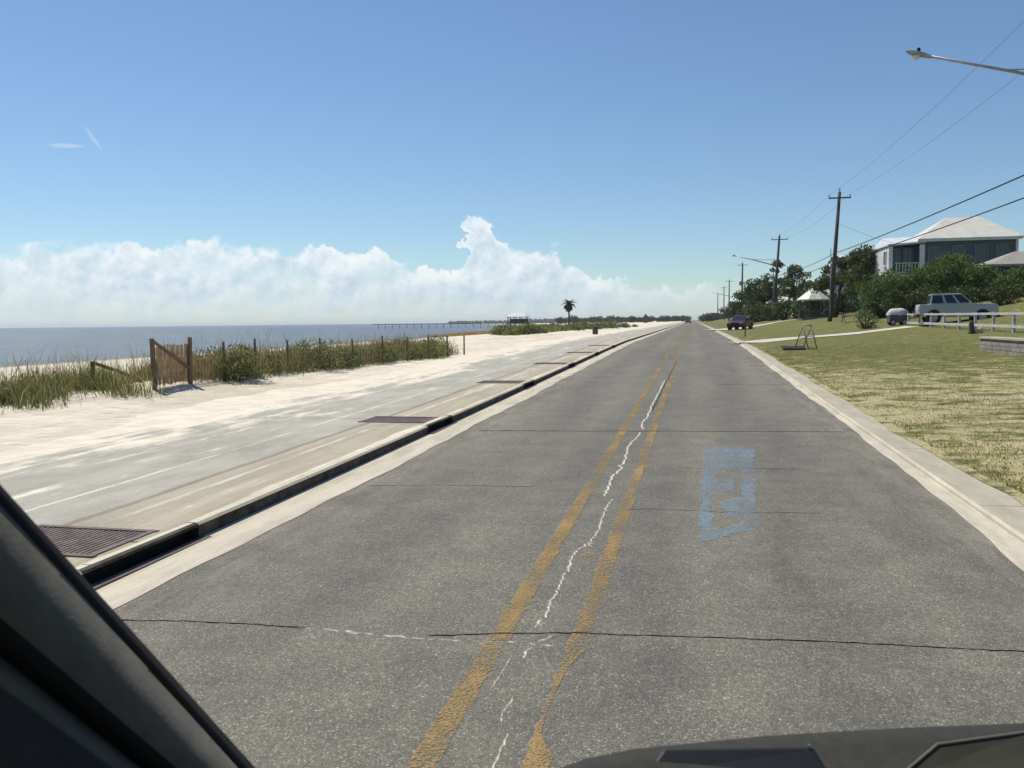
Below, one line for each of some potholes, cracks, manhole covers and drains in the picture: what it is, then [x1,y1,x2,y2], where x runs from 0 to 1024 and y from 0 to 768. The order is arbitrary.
drain grate [476,380,538,389]
drain grate [37,523,212,590]
drain grate [358,415,458,434]
